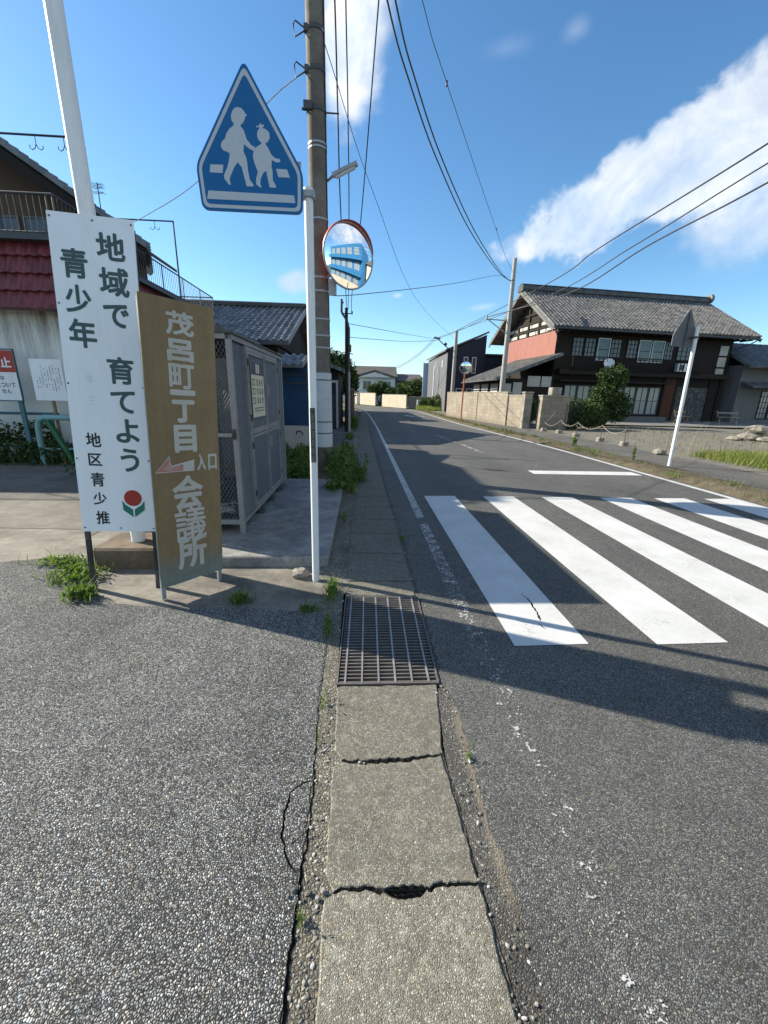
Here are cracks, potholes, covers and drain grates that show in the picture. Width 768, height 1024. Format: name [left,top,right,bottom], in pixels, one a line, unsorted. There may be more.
crack [333,723,523,1024]
crack [280,632,329,1024]
drain grate [336,596,439,689]
